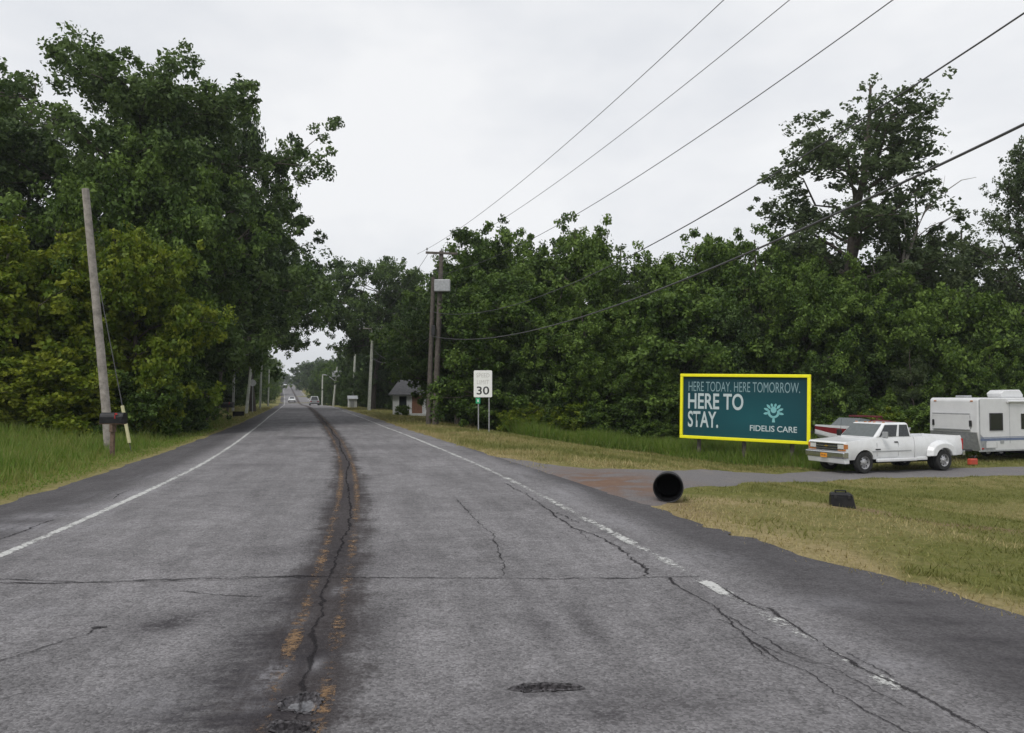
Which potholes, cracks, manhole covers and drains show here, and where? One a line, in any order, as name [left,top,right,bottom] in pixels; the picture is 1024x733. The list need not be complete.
crack [457,500,505,575]
crack [1,626,107,660]
pothole [277,691,326,715]
pothole [508,682,586,693]
crack [503,482,650,577]
crack [1,575,683,597]
crack [669,577,989,733]
pothole [266,719,321,733]
